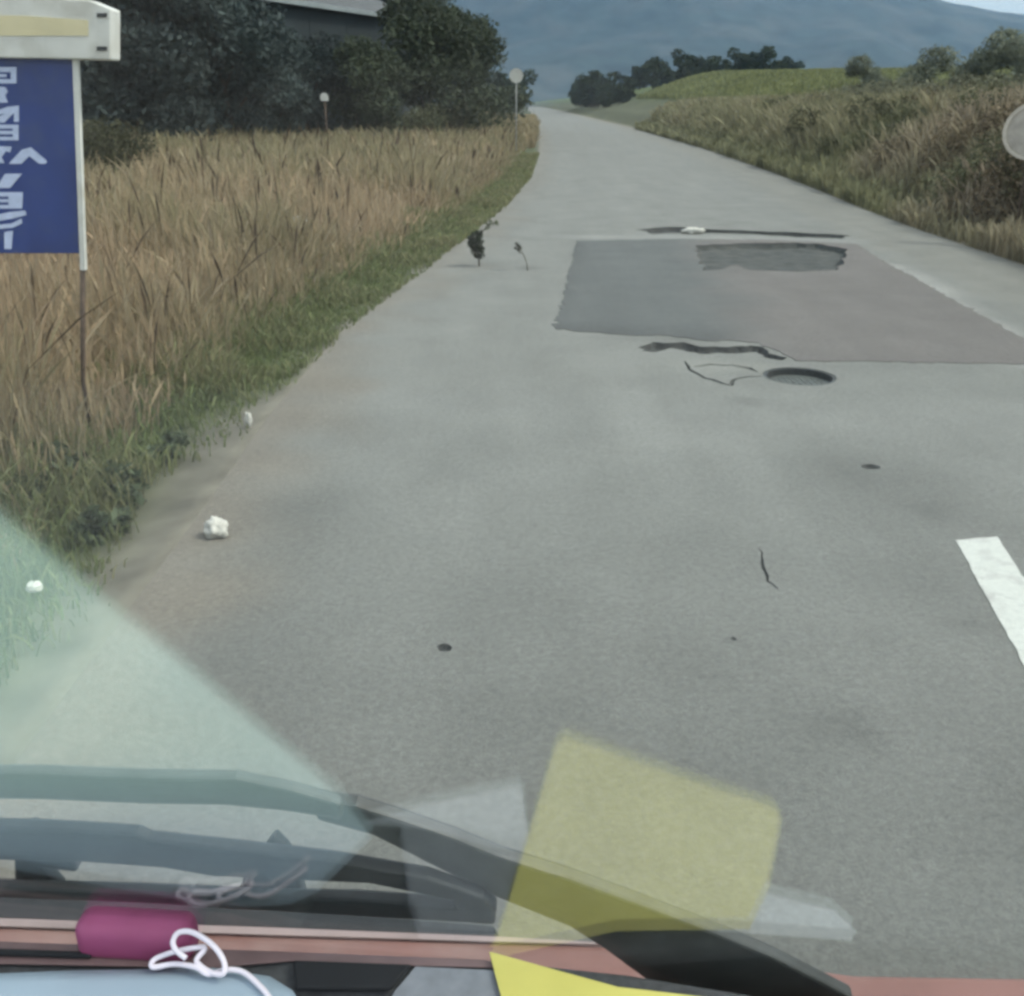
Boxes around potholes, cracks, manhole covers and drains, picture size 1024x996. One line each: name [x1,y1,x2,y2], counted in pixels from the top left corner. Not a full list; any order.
crack [684,361,760,386]
crack [759,549,778,589]
pothole [696,243,847,272]
